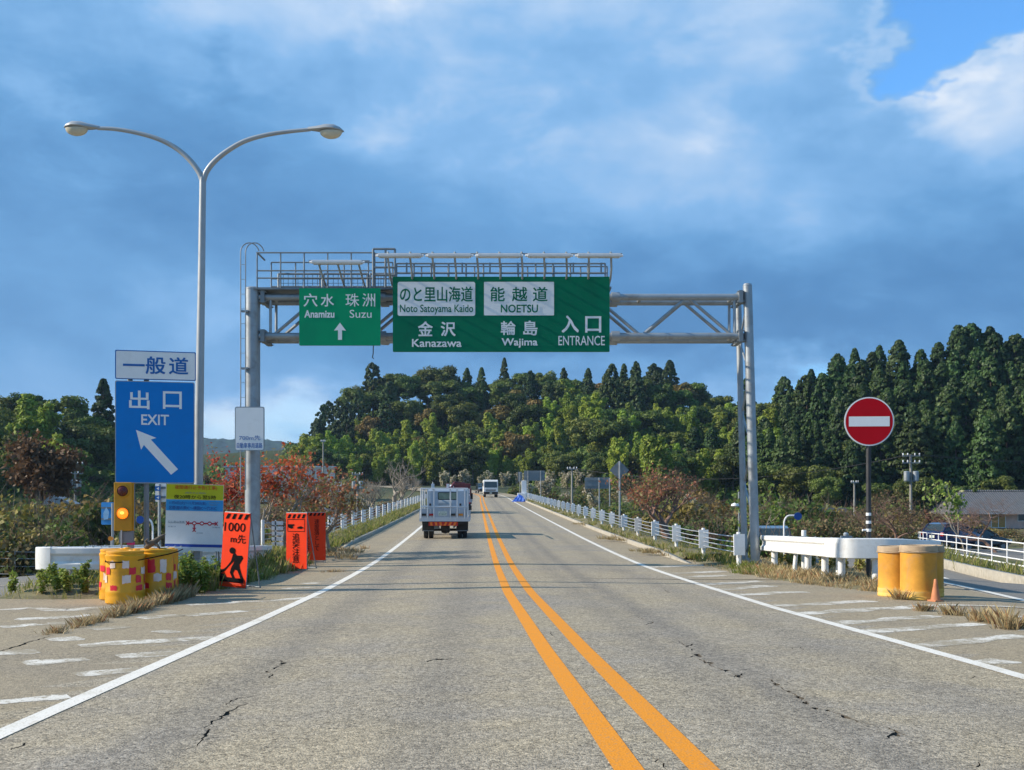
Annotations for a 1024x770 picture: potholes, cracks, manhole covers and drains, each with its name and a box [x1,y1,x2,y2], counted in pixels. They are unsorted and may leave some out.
crack [679,642,868,724]
crack [886,727,907,739]
crack [179,695,256,750]
